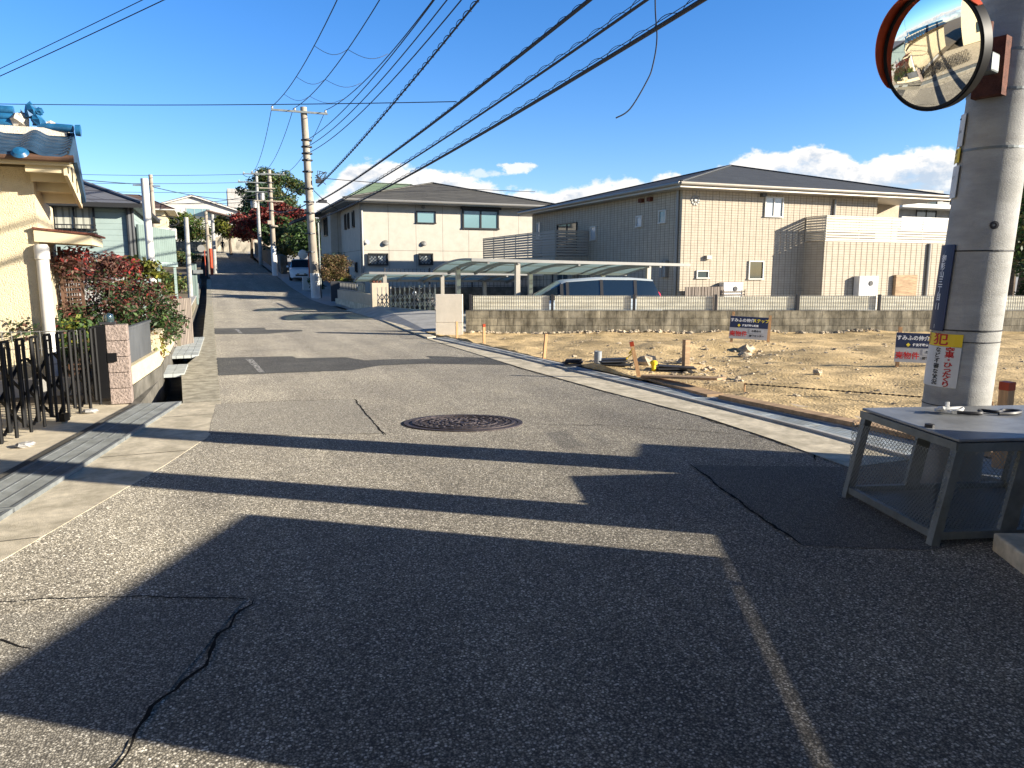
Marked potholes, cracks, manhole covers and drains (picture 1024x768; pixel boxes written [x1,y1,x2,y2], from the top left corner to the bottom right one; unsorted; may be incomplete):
crack [241,399,386,434]
crack [543,416,816,545]
manhole cover [404,414,523,432]
crack [0,595,254,768]
